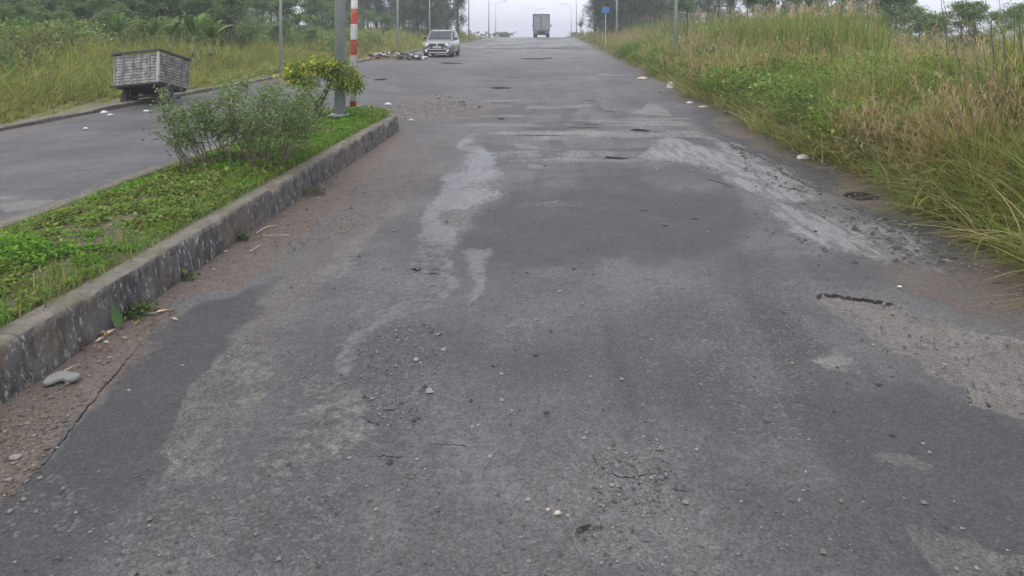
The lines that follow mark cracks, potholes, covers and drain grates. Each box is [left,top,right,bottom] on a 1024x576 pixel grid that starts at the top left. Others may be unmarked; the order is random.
pothole [813,293,1024,420]
pothole [843,192,881,201]
crack [592,448,688,492]
